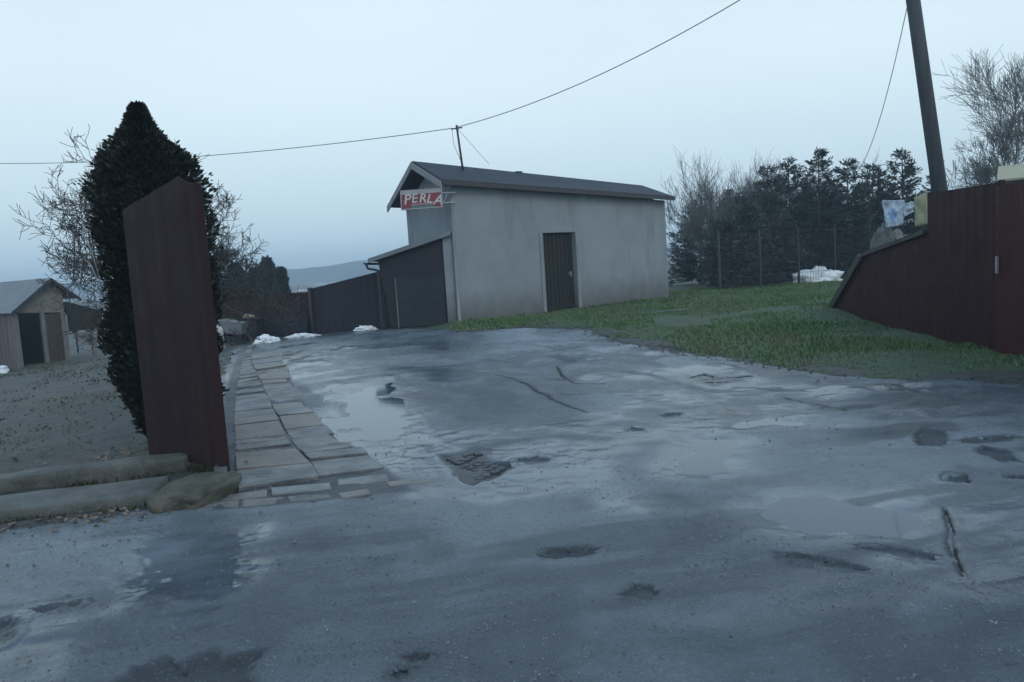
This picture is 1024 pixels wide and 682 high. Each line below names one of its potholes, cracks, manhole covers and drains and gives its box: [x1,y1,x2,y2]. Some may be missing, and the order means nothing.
pothole [841,541,958,566]
pothole [965,445,1024,464]
pothole [765,549,883,574]
pothole [527,542,611,562]
pothole [946,433,1024,445]
pothole [20,597,95,618]
pothole [375,662,424,682]
pothole [933,470,986,485]
crack [932,505,980,580]
pothole [432,445,524,488]
pothole [608,580,675,607]
crack [496,365,607,413]
